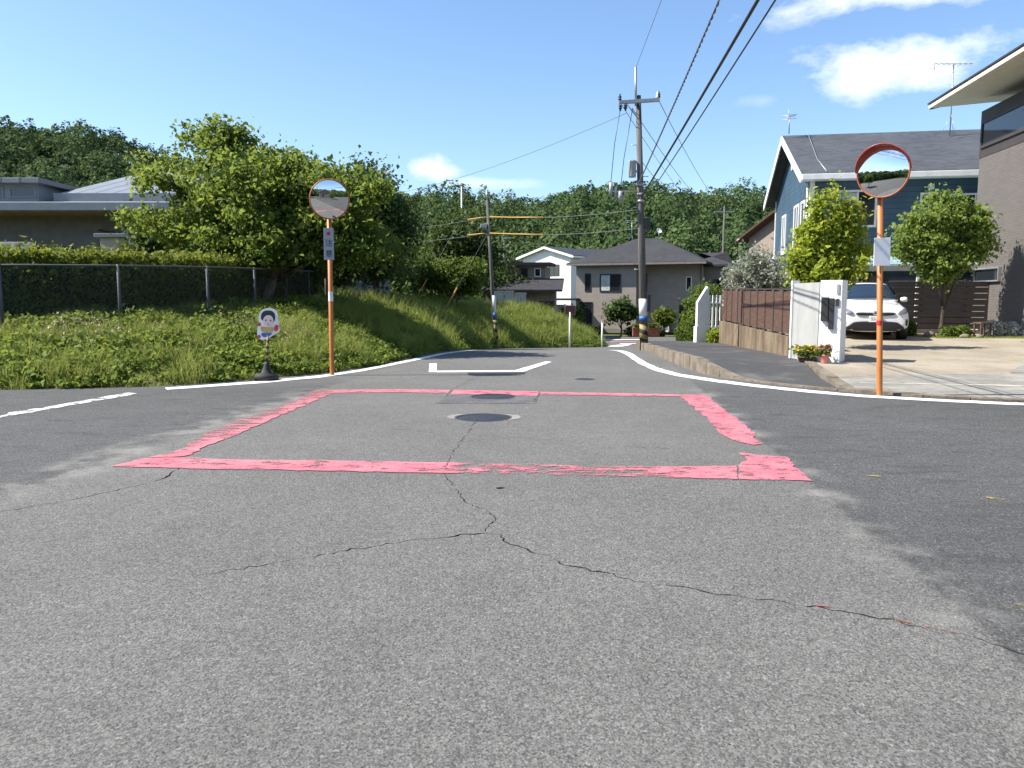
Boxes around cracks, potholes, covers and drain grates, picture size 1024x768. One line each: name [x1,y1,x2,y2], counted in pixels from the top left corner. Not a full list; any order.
crack [197,422,1024,655]
manhole cover [448,413,521,422]
crack [1,468,180,512]
